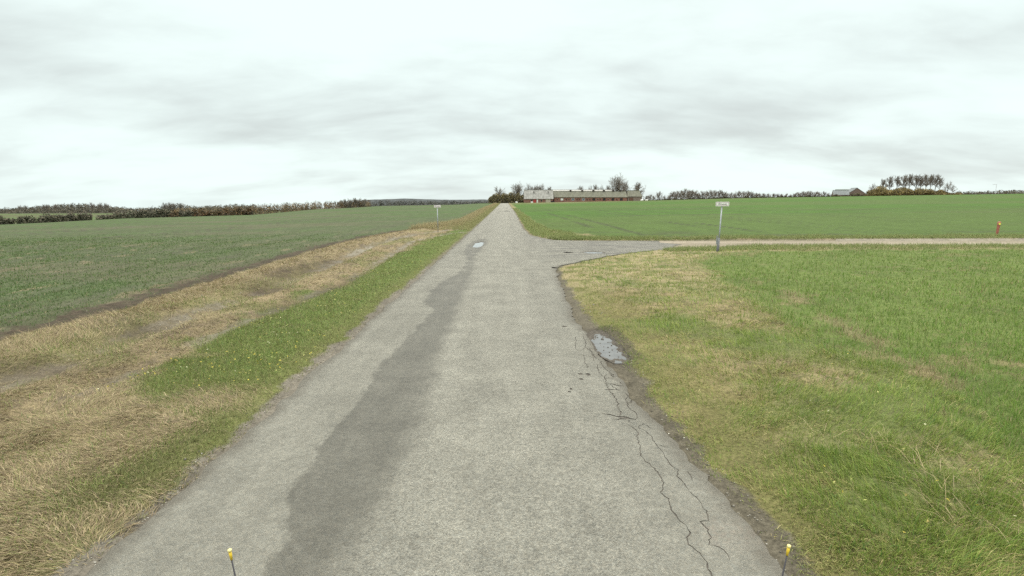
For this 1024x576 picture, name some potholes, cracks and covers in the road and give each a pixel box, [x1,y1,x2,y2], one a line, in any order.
pothole [587,330,631,364]
crack [575,337,730,576]
